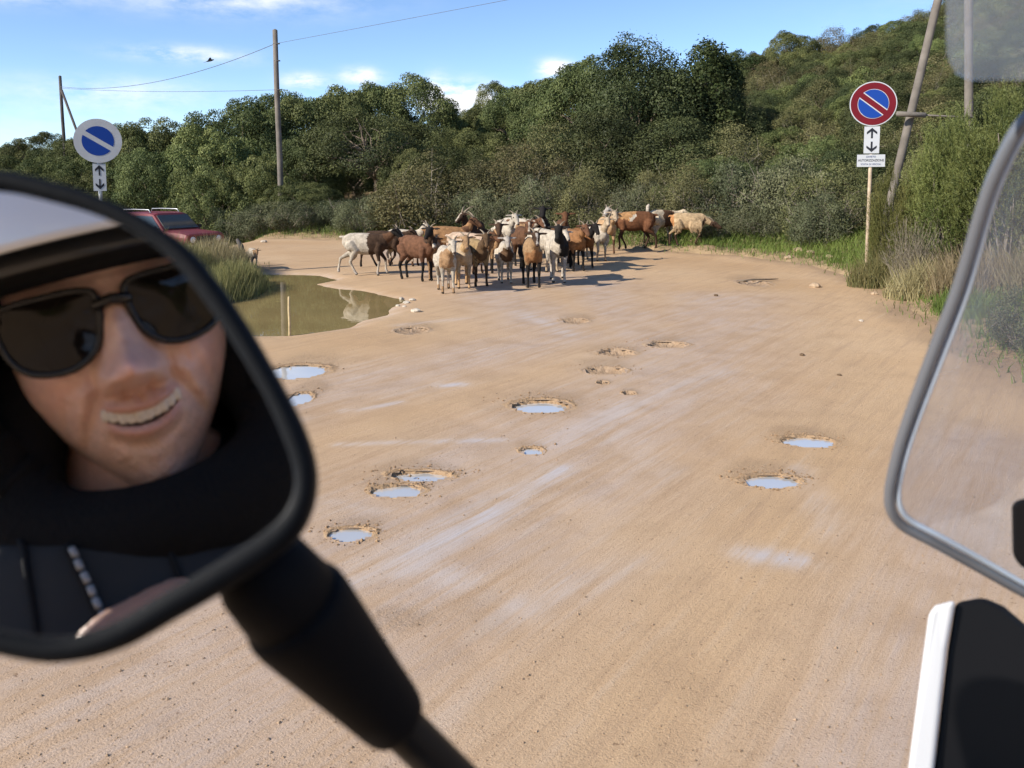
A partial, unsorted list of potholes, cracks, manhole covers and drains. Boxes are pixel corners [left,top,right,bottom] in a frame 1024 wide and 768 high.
pothole [273,357,356,381]
pothole [515,443,557,456]
pothole [567,361,642,376]
pothole [308,520,419,545]
pothole [589,346,646,358]
pothole [742,430,850,450]
pothole [549,315,592,325]
pothole [726,278,776,288]
pothole [704,464,819,493]
pothole [378,324,433,336]
pothole [289,387,323,407]
pothole [626,338,696,349]
